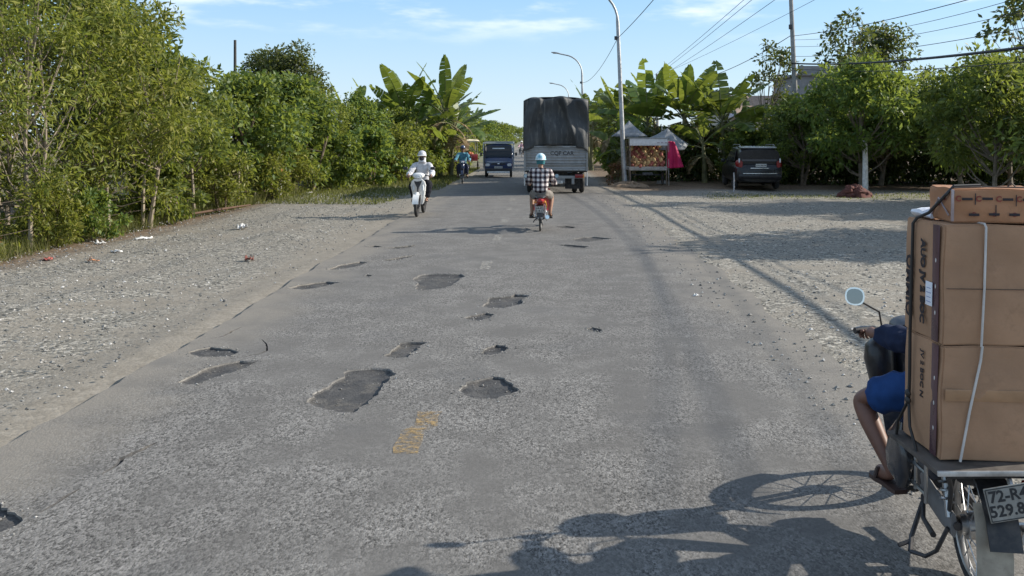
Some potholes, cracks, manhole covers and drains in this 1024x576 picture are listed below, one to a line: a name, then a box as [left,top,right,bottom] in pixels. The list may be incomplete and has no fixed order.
pothole [482,345,508,355]
pothole [289,282,339,290]
pothole [327,262,367,270]
pothole [178,360,259,384]
pothole [413,273,465,290]
crack [102,442,157,474]
pothole [189,347,238,357]
pothole [0,504,23,532]
pothole [482,294,529,308]
pothole [385,342,427,358]
pothole [306,368,396,413]
pothole [459,377,519,399]
